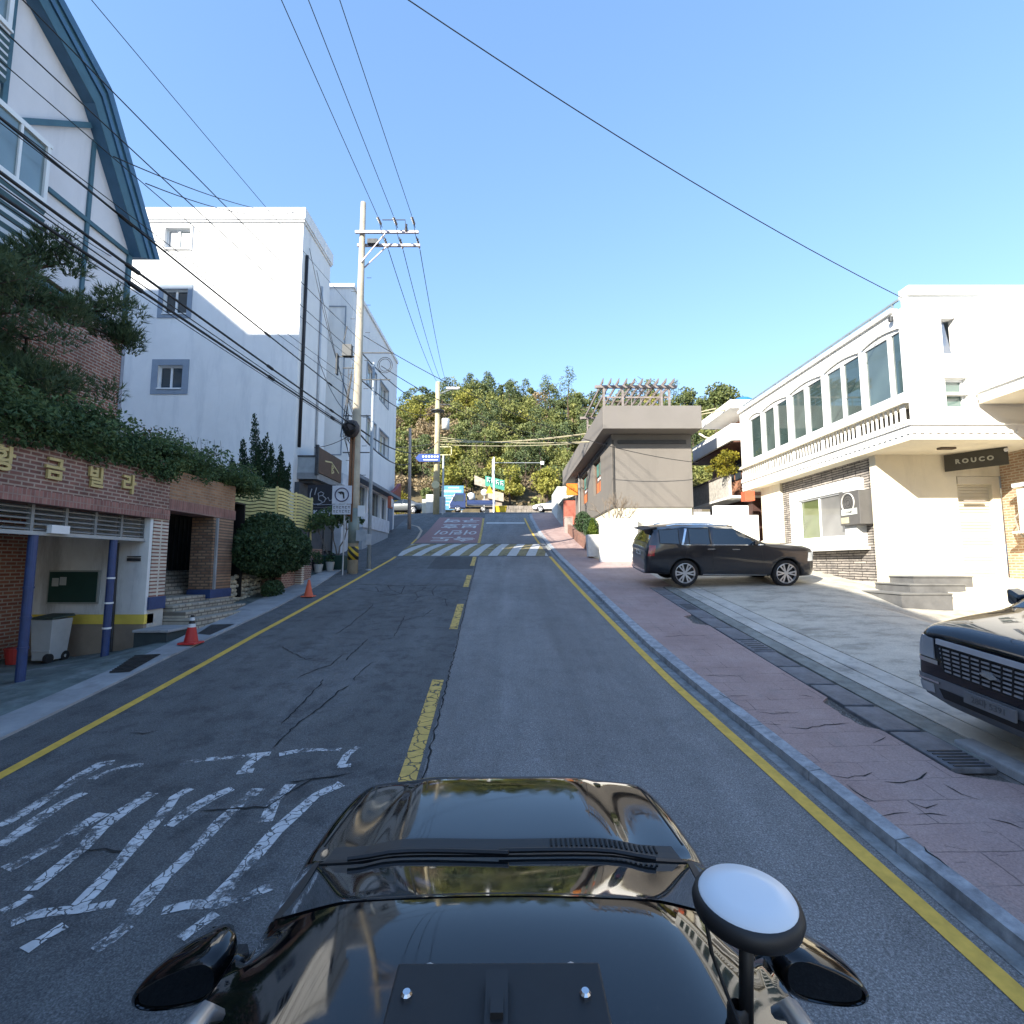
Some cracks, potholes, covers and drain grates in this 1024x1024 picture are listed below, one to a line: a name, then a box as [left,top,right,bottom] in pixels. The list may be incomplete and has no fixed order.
crack [832,762,979,816]
crack [763,695,843,729]
crack [200,773,350,811]
crack [273,584,447,748]
